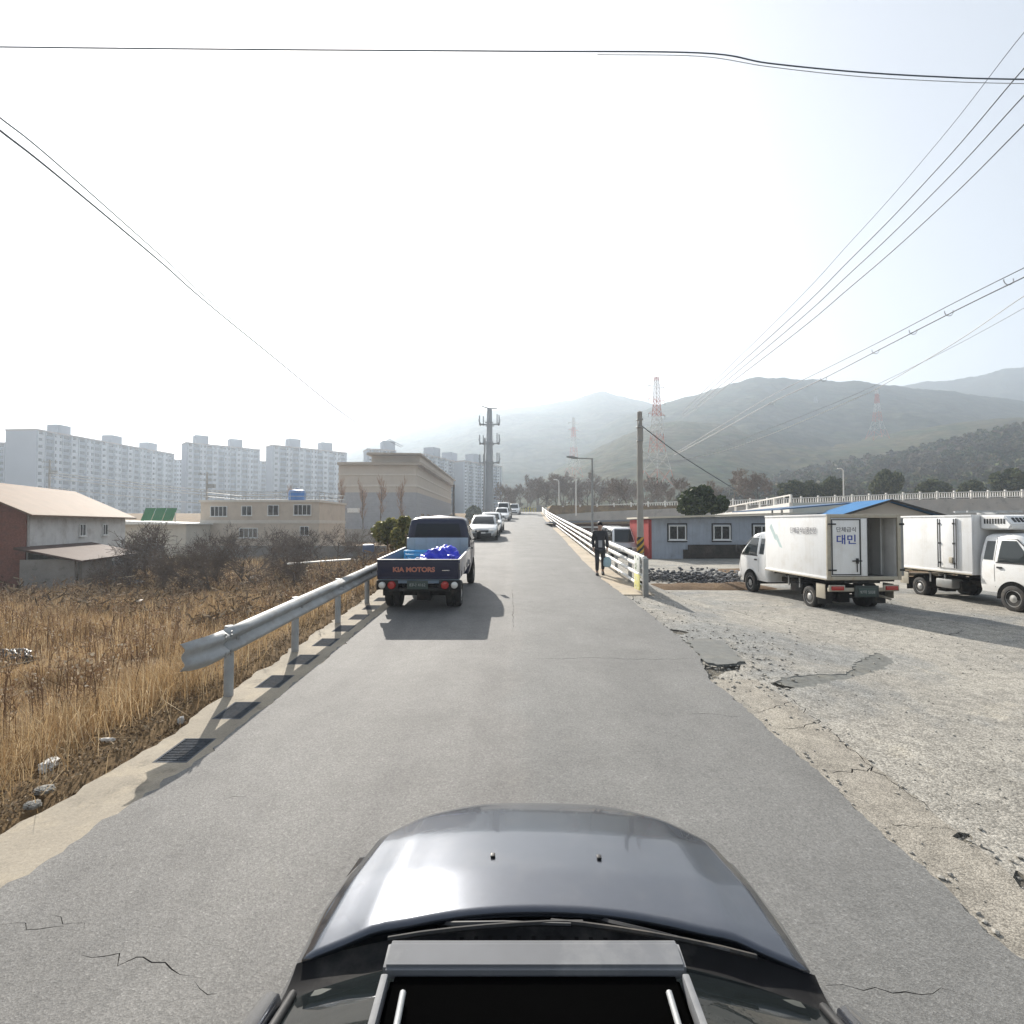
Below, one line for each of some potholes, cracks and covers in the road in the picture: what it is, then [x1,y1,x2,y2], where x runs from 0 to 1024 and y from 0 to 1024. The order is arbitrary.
crack [764,698,963,837]
drain grate [312,638,340,646]
drain grate [212,702,261,719]
pothole [704,665,740,679]
drain grate [255,675,294,688]
crack [83,953,217,995]
drain grate [286,655,319,665]
drain grate [152,738,216,763]
crack [826,984,951,995]
